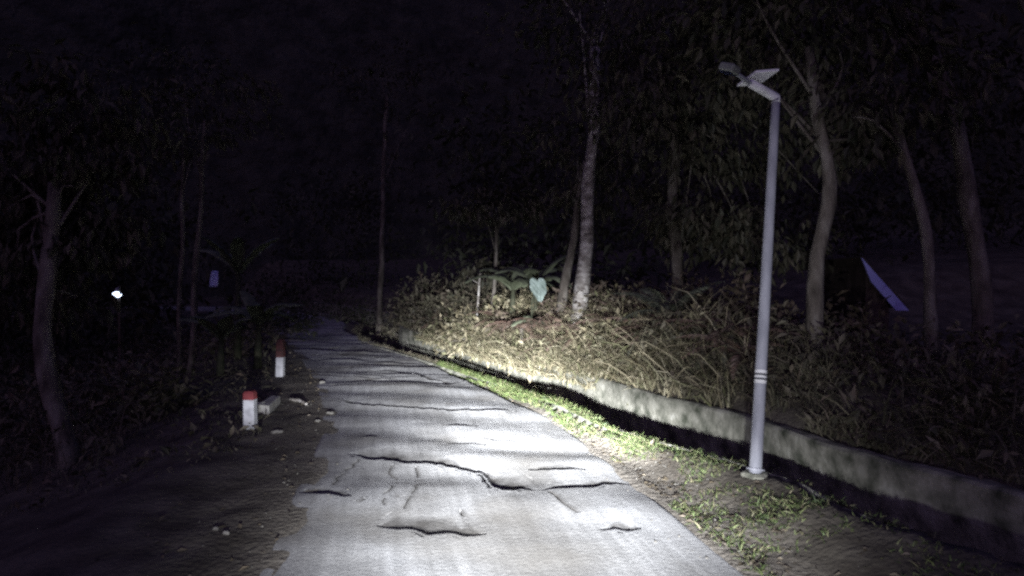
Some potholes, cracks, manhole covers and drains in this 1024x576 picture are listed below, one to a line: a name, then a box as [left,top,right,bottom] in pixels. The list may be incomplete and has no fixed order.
crack [307,347,532,446]
crack [323,458,432,510]
crack [451,509,481,529]
